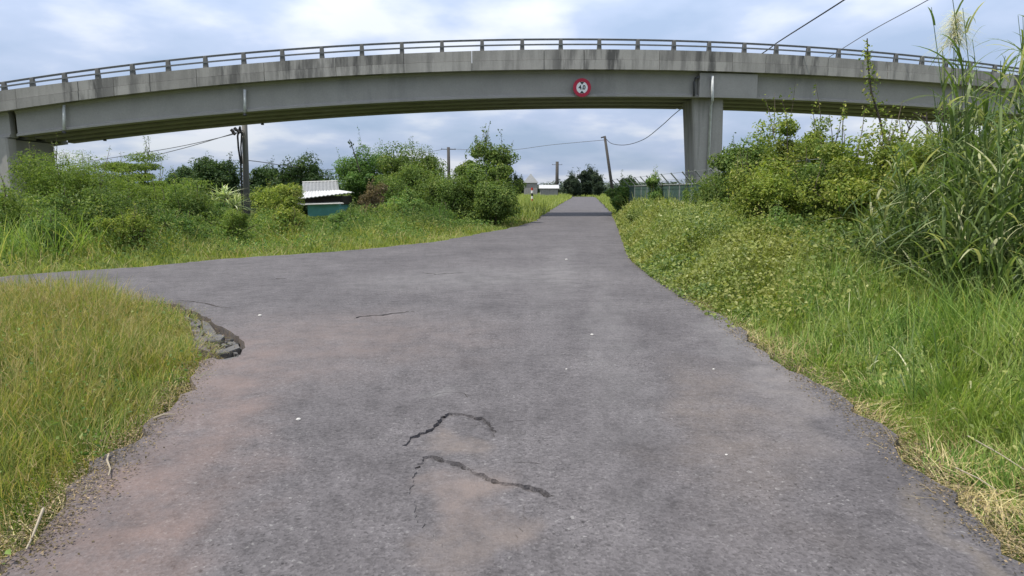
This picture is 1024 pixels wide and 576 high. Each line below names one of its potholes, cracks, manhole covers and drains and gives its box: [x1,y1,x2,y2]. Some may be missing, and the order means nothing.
pothole [181,309,245,360]
